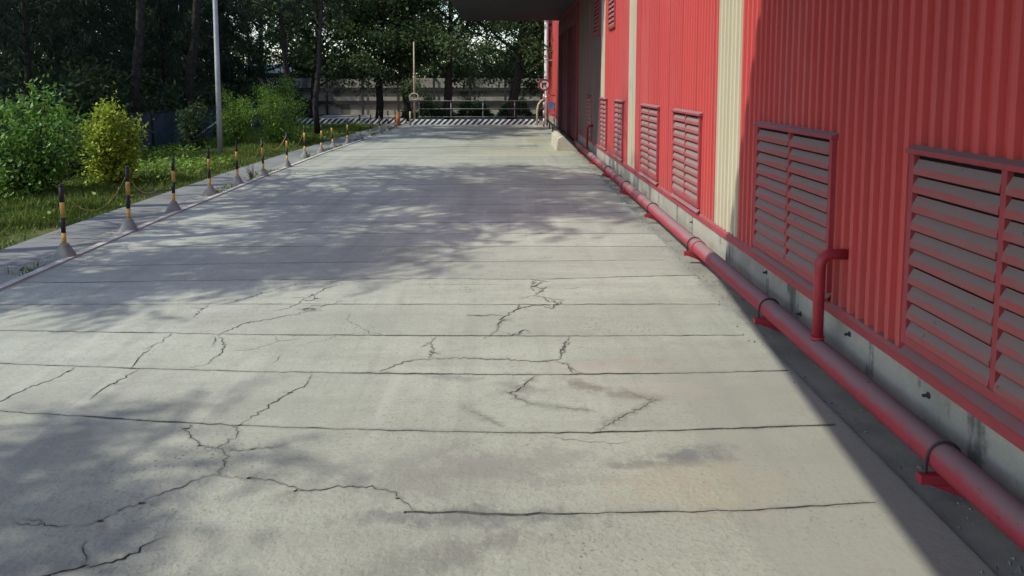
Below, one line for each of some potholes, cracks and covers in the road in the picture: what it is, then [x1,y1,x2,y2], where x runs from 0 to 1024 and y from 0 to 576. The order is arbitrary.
crack [238,477,415,513]
crack [97,375,312,522]
crack [17,518,158,576]
crack [460,280,573,336]
crack [563,393,656,444]
crack [93,334,171,397]
crack [215,280,385,359]
